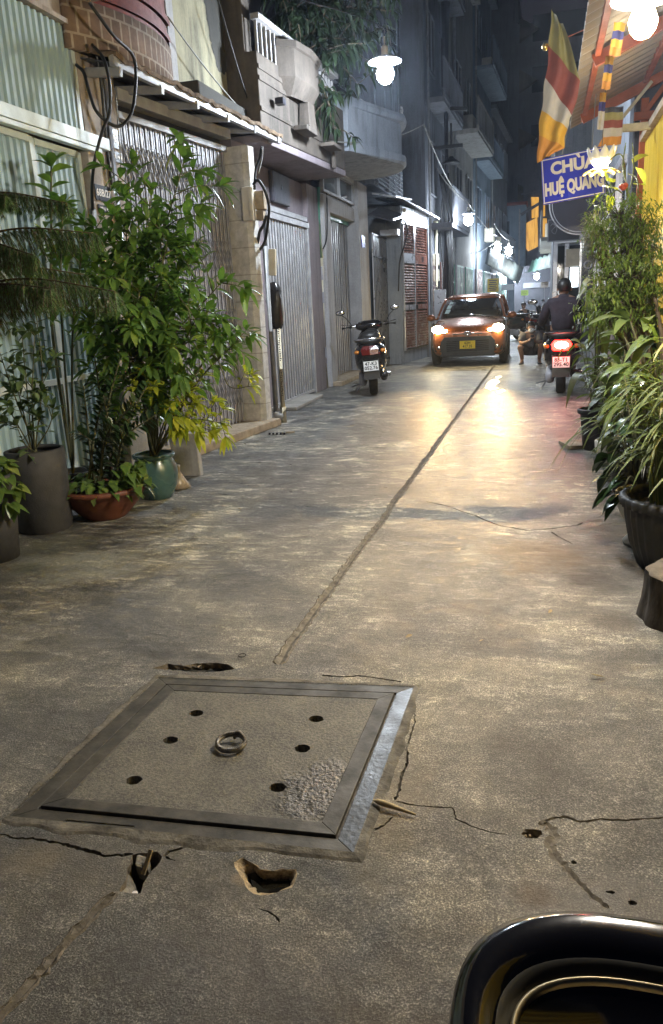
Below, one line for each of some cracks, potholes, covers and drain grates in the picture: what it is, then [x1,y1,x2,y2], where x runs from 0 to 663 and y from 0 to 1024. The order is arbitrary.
crack [0,834,133,857]
crack [370,715,502,839]
crack [426,501,583,544]
pothole [521,829,543,838]
crack [538,815,663,908]
manhole cover [2,675,421,863]
pothole [119,852,162,893]
pothole [234,858,297,895]
pothole [153,663,234,672]
crack [163,847,183,861]
